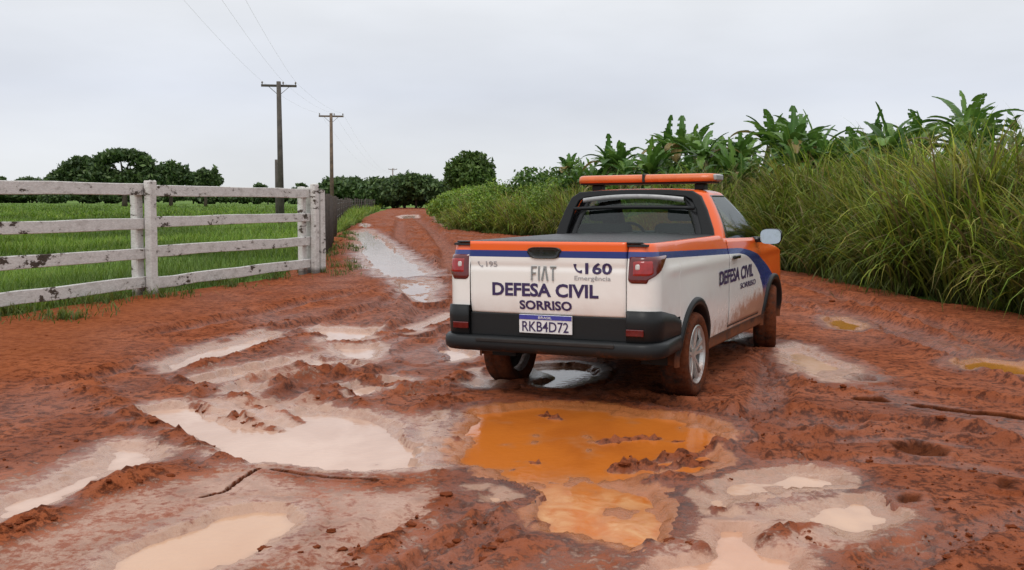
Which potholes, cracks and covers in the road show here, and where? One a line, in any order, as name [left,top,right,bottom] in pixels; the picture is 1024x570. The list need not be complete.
pothole [416,396,760,565]
pothole [751,339,888,389]
pothole [512,360,617,392]
pothole [95,396,449,482]
pothole [606,511,849,570]
crack [839,390,1024,423]
pothole [877,437,963,463]
pothole [807,314,883,334]
pothole [286,320,399,346]
crack [189,466,390,502]
pothole [664,457,877,532]
pothole [341,228,452,279]
